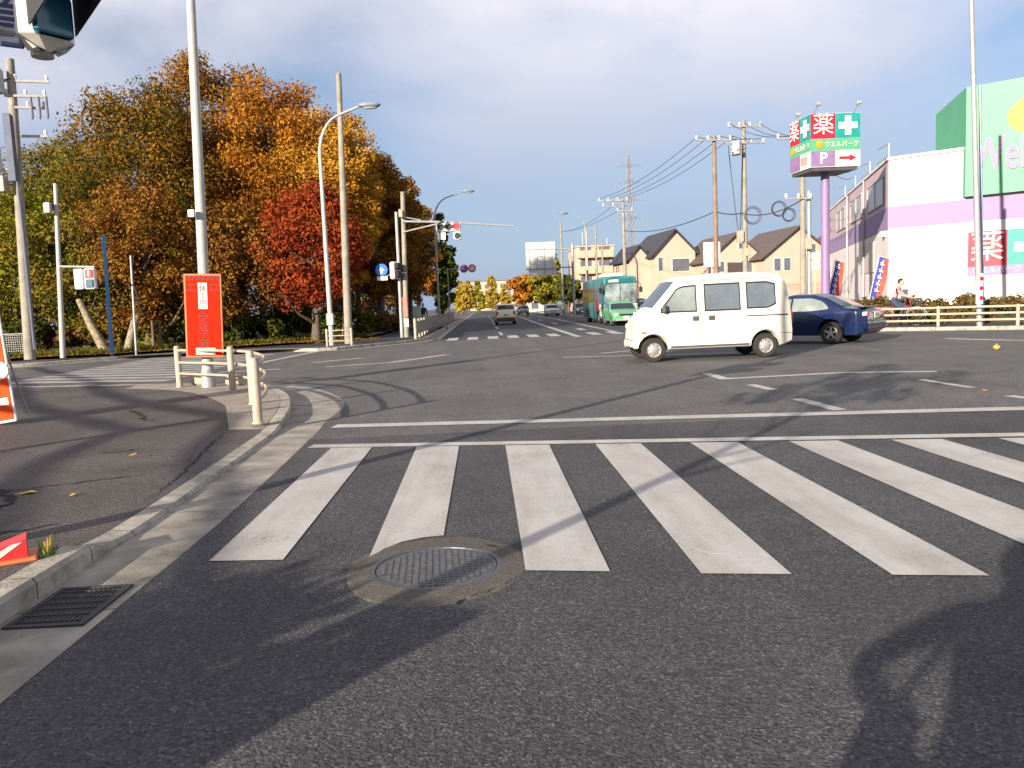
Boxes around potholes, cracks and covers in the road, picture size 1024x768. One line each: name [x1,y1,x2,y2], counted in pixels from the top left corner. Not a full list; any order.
drain grate [1,584,134,630]
manhole cover [347,537,526,608]
